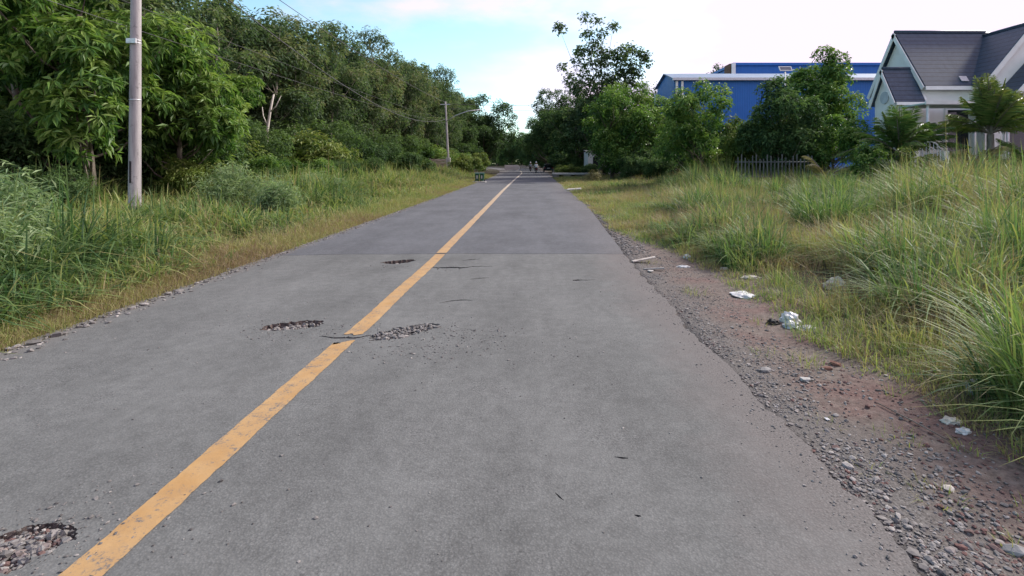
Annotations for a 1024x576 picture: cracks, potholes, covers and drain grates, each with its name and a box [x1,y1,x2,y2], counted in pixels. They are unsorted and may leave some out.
crack [433,259,489,279]
pothole [260,320,324,331]
pothole [0,522,78,574]
pothole [369,323,440,341]
